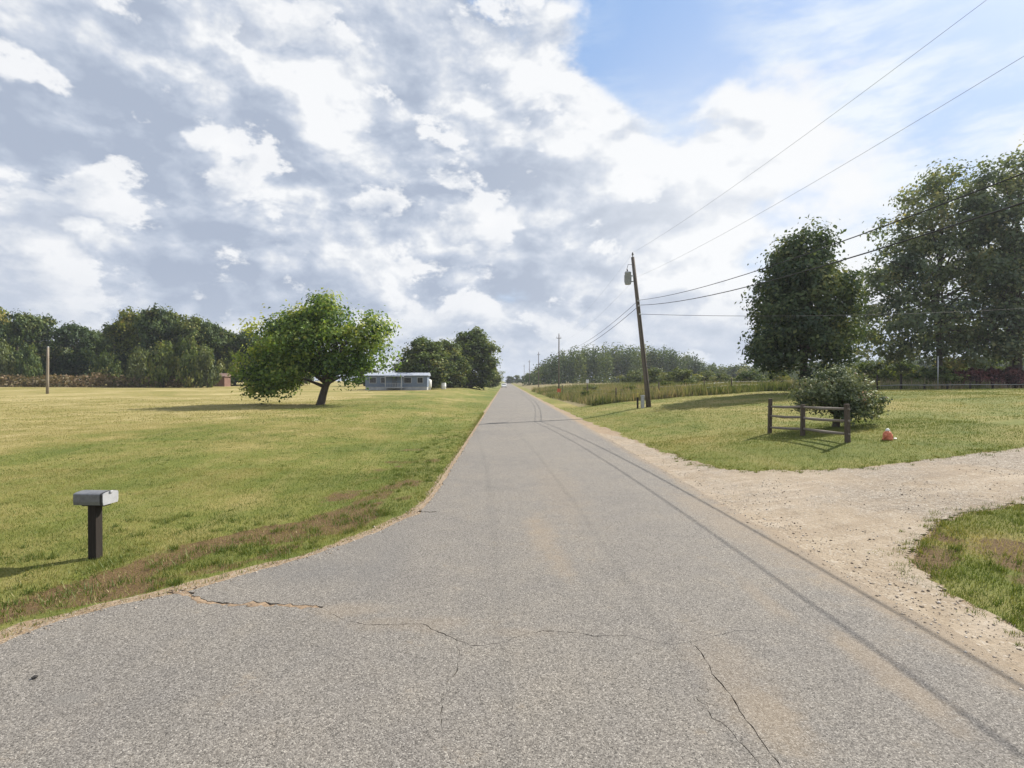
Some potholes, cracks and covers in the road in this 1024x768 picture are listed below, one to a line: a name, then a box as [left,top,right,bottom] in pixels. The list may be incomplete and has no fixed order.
crack [167,590,779,764]
